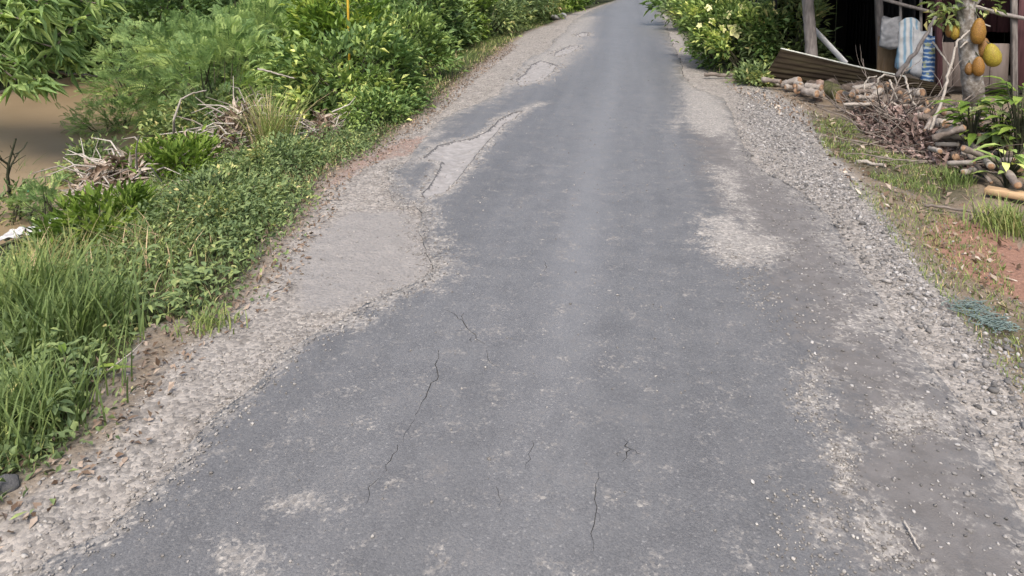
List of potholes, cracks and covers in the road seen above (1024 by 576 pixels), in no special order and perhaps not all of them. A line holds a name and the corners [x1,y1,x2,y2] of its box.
crack [590,478,599,551]
pothole [510,59,566,87]
pothole [408,108,524,202]
crack [365,351,439,505]
